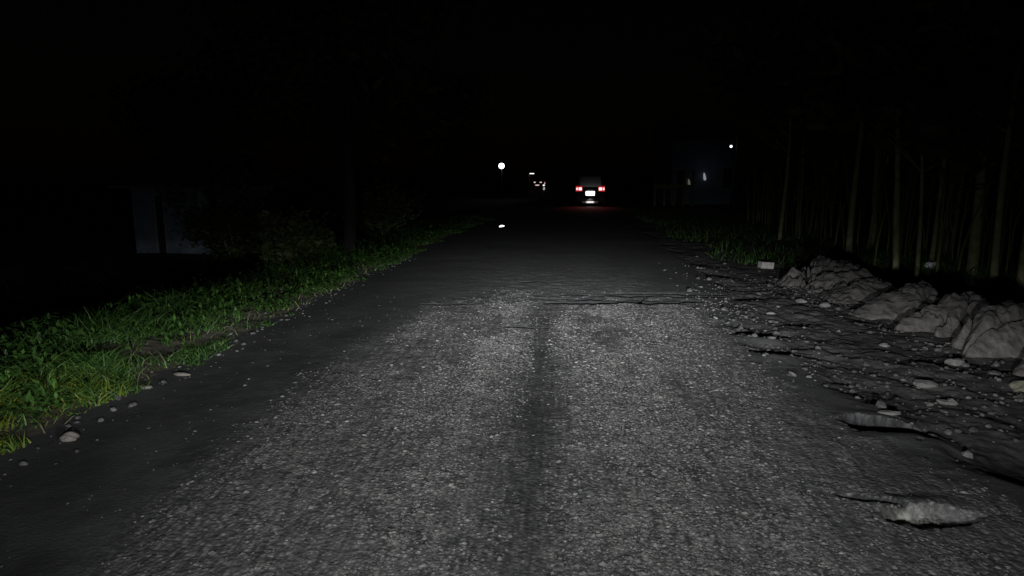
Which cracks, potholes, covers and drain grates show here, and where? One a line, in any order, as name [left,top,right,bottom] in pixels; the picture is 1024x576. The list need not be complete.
pothole [832,413,941,441]
crack [518,280,728,305]
pothole [834,492,1006,534]
